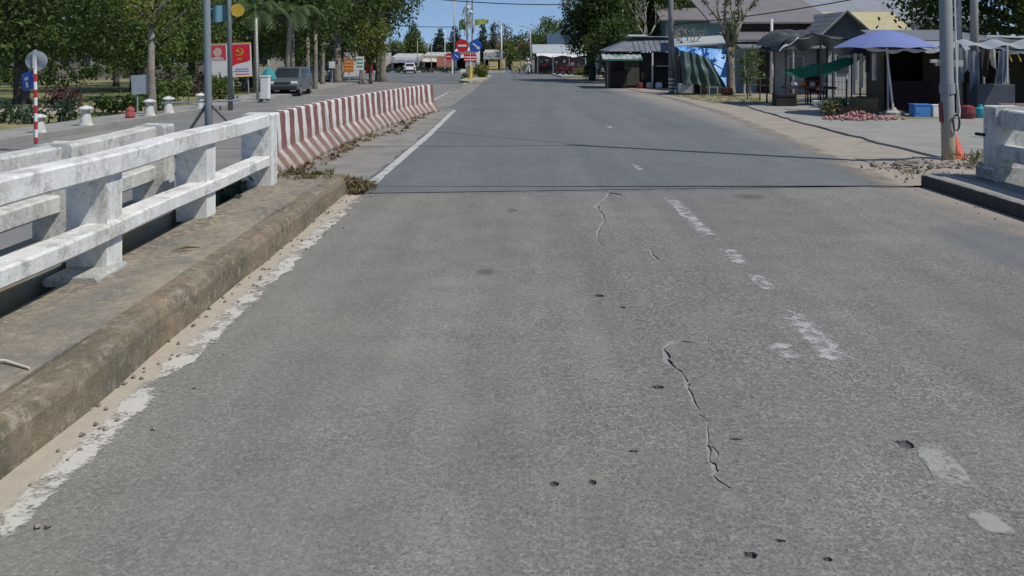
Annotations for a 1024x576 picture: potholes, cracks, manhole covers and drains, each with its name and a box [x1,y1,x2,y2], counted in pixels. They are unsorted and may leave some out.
pothole [894,440,914,449]
crack [594,192,661,261]
crack [662,335,731,488]
